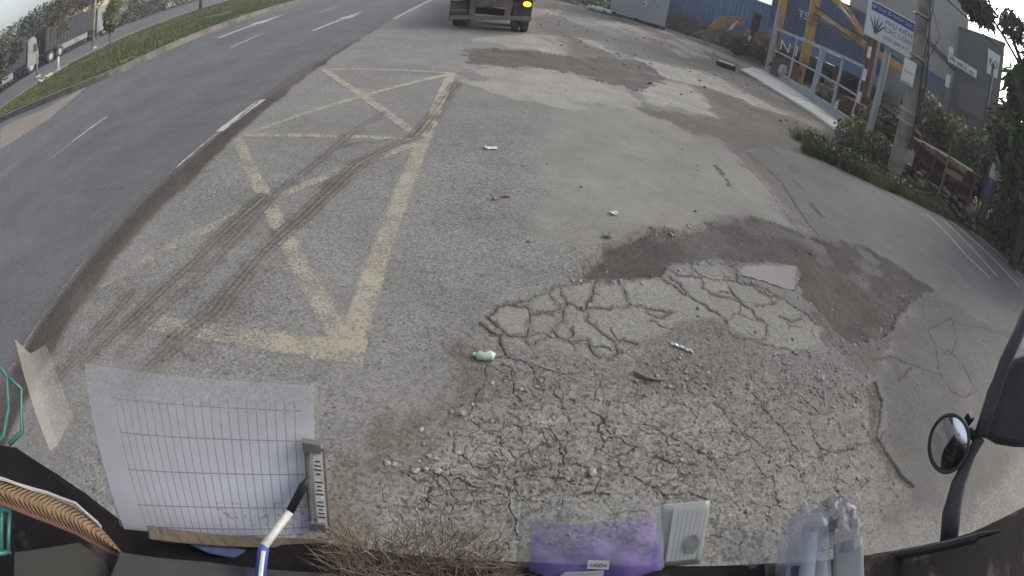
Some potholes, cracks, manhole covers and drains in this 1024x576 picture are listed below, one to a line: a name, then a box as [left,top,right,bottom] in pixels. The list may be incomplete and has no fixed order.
pothole [569,215,935,346]
crack [872,318,1006,399]
crack [361,263,899,558]
